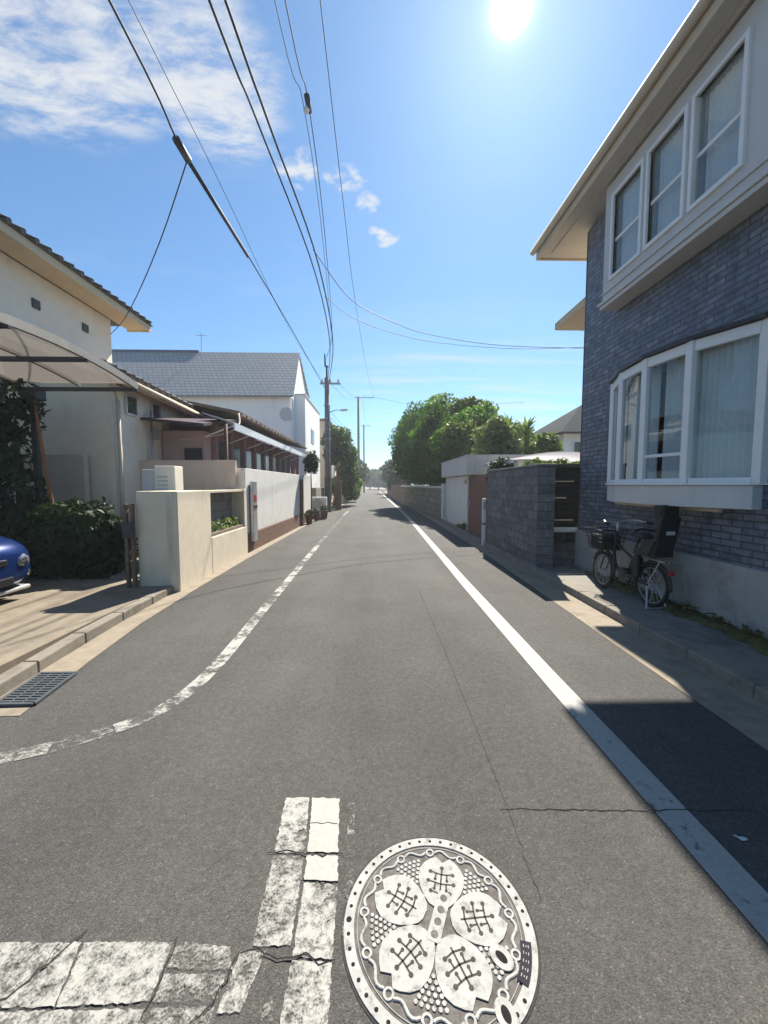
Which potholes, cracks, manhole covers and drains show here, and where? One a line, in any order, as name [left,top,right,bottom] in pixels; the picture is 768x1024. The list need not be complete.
crack [138,936,177,1024]
crack [0,931,86,1001]
crack [267,849,343,857]
manhole cover [341,837,541,1024]
crack [194,948,335,1024]
drain grate [0,671,78,706]
